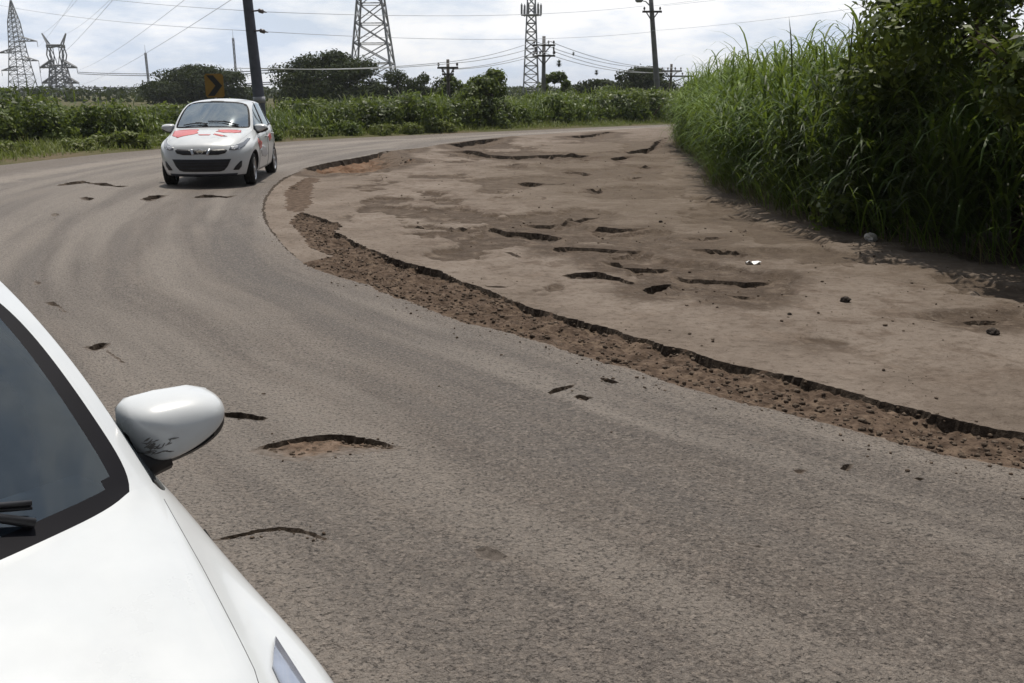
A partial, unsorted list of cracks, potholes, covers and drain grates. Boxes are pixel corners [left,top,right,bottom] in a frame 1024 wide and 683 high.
pothole [249,434,405,462]
pothole [562,272,637,285]
pothole [447,150,601,162]
pothole [83,343,111,351]
pothole [684,249,767,258]
pothole [548,247,646,260]
pothole [547,384,576,395]
pothole [486,228,570,246]
pothole [642,284,673,294]
pothole [224,412,269,421]
